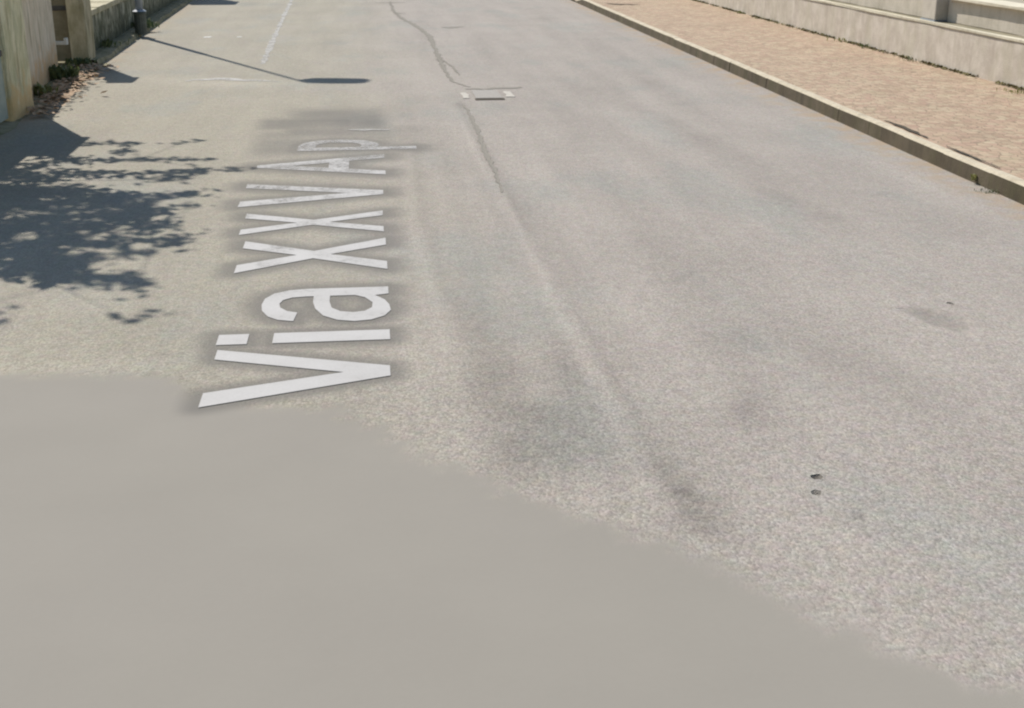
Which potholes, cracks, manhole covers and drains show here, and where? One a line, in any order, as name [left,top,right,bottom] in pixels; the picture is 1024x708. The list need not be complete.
manhole cover [460,87,522,100]
pothole [803,487,829,499]
crack [389,1,470,87]
pothole [803,471,830,483]
crack [463,105,503,193]
